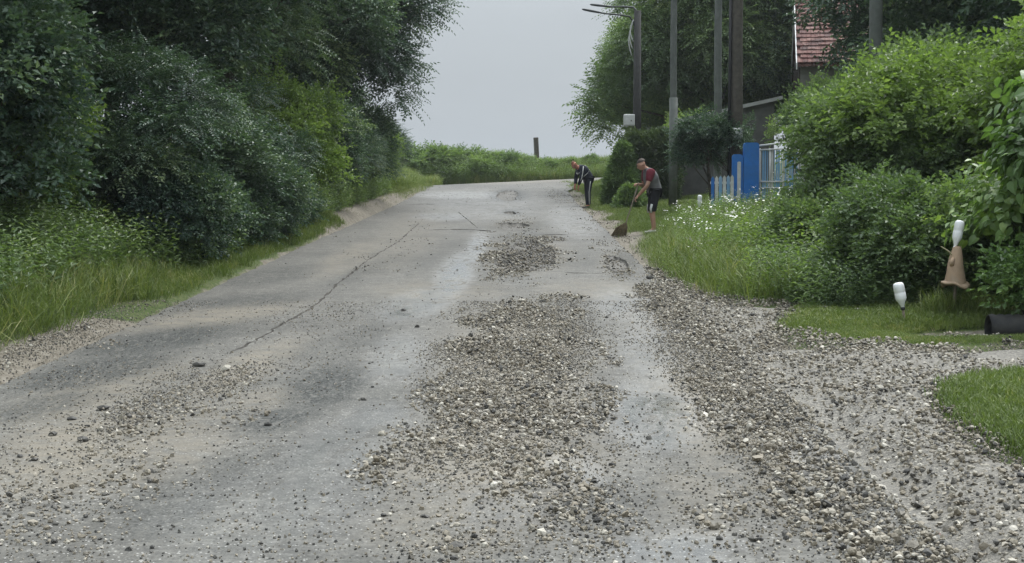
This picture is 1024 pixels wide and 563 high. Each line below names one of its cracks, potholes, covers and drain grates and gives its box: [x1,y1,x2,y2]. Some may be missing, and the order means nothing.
crack [227,223,419,355]
pothole [493,240,556,271]
pothole [497,190,519,202]
pothole [605,256,629,271]
